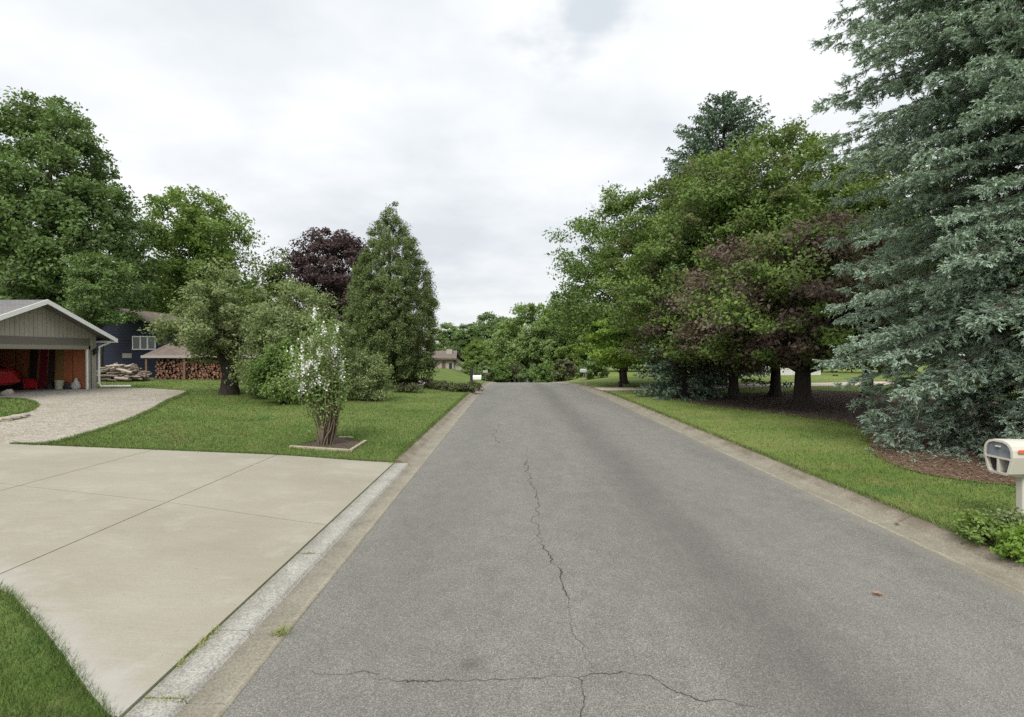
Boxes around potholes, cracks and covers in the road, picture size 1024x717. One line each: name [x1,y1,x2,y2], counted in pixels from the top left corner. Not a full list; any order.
crack [313,451,749,717]
